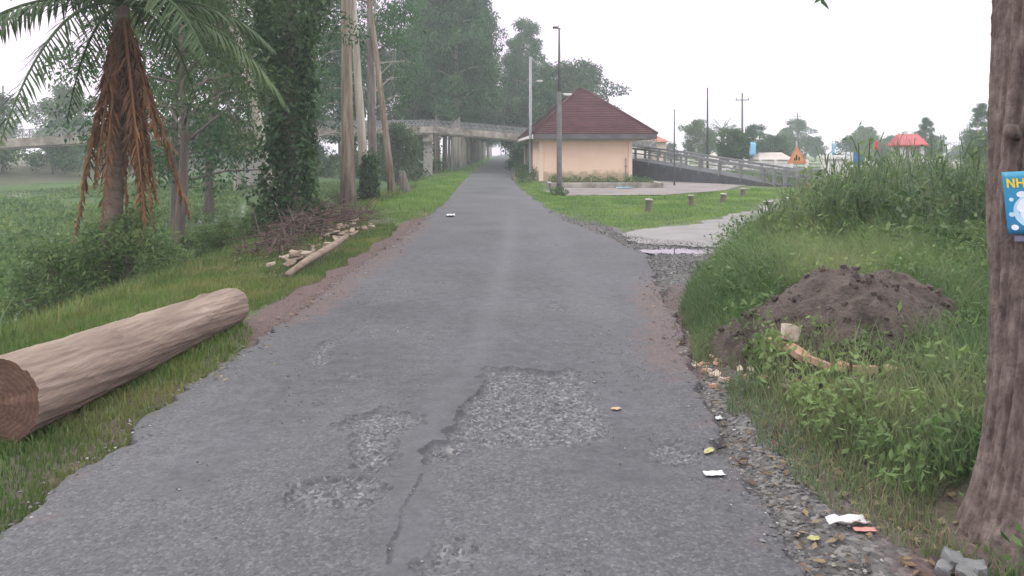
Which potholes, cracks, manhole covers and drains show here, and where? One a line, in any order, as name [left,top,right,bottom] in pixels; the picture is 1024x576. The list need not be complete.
pothole [298,335,345,371]
pothole [278,474,394,518]
pothole [640,439,705,468]
pothole [406,537,486,576]
crack [385,472,424,564]
pothole [416,366,619,466]
pothole [327,404,428,474]
